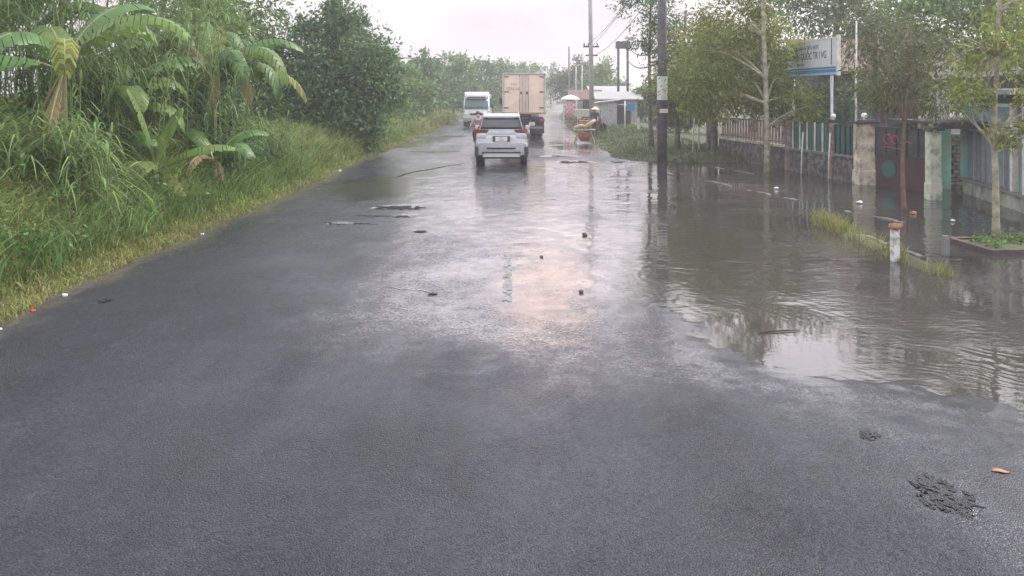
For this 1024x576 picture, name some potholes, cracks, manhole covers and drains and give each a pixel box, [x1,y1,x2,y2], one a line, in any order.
pothole [907,472,985,519]
crack [399,151,464,177]
pothole [859,430,882,440]
